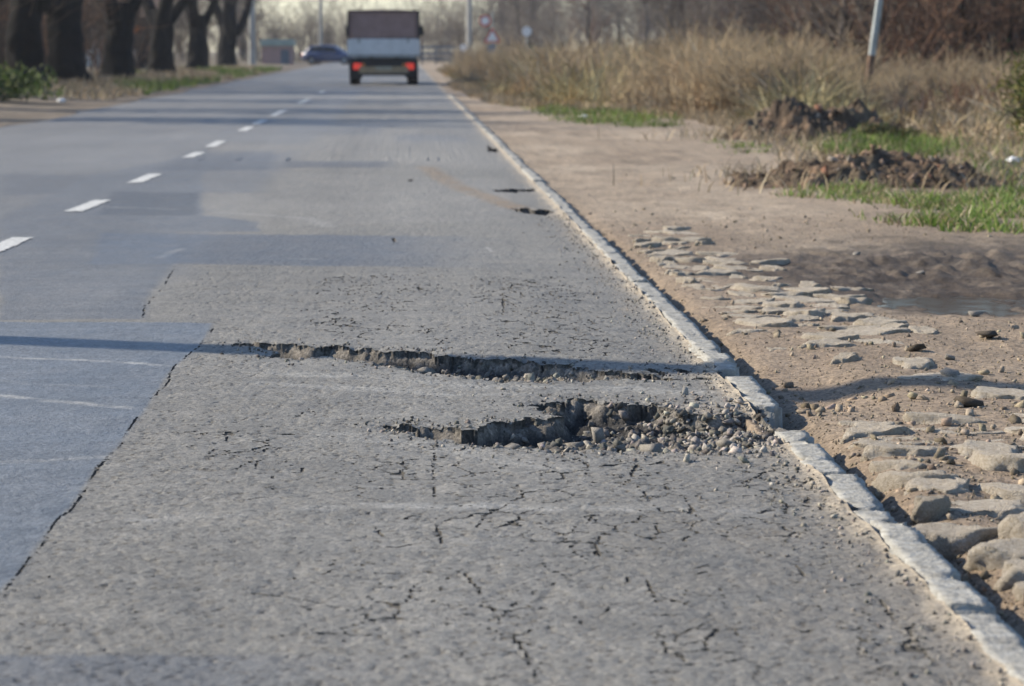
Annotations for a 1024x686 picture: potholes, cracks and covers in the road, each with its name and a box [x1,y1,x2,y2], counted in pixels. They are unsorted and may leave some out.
crack [795,563,960,679]
crack [251,444,721,684]
pothole [383,398,775,455]
crack [569,551,773,679]
crack [176,405,336,500]
crack [646,367,713,380]
pothole [512,208,553,216]
crack [2,328,214,598]
